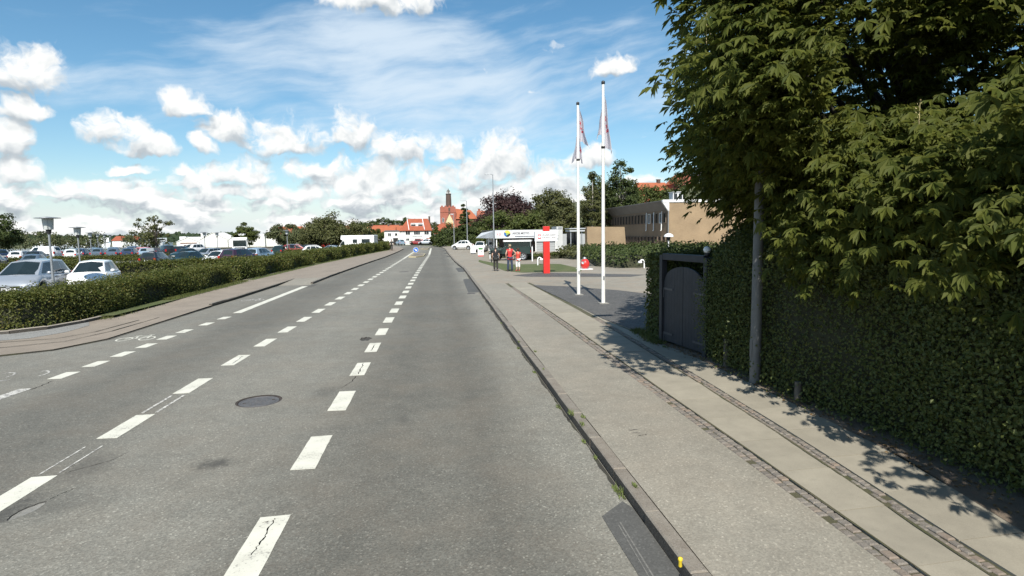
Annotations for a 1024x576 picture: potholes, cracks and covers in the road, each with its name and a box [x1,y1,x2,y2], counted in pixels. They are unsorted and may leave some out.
manhole cover [235,395,282,407]
